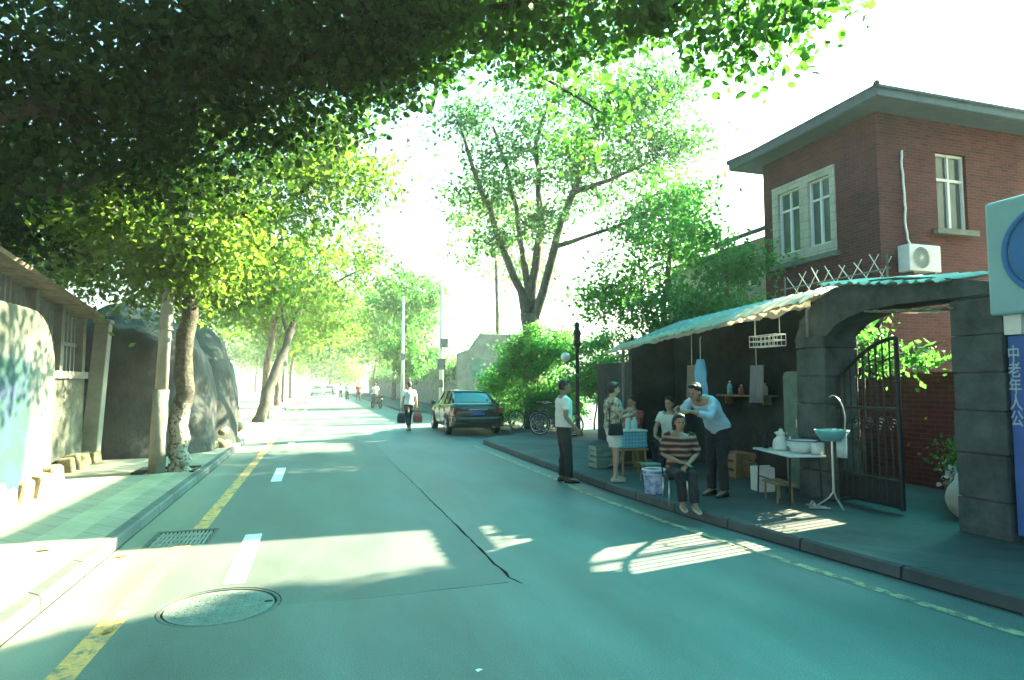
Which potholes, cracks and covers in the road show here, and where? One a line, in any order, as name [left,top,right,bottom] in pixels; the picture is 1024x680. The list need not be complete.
drain grate [142,529,218,548]
manhole cover [156,588,281,628]
crack [387,459,520,589]
